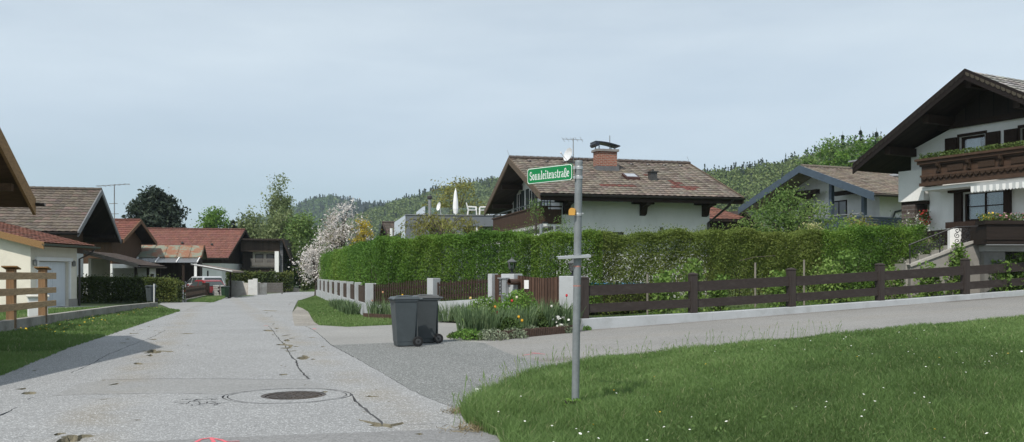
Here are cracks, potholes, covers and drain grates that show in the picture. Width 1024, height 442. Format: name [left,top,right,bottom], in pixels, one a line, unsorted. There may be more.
manhole cover [261,391,326,400]
